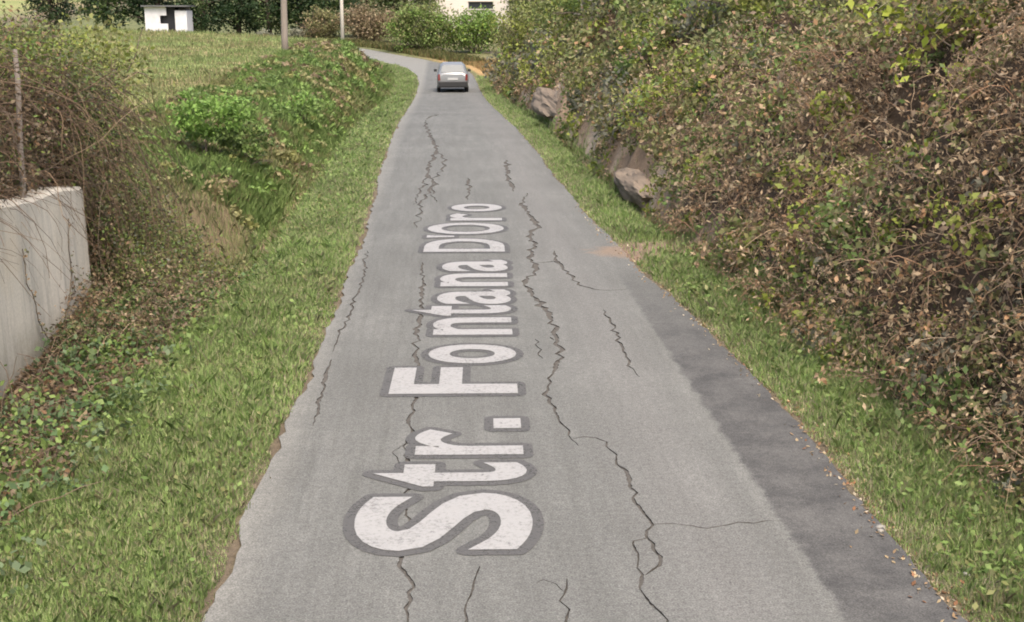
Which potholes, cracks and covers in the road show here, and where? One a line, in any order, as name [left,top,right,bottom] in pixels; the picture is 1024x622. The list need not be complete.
crack [392,262,426,622]
crack [464,566,480,622]
crack [413,114,447,228]
crack [504,160,771,622]
crack [313,251,369,424]
